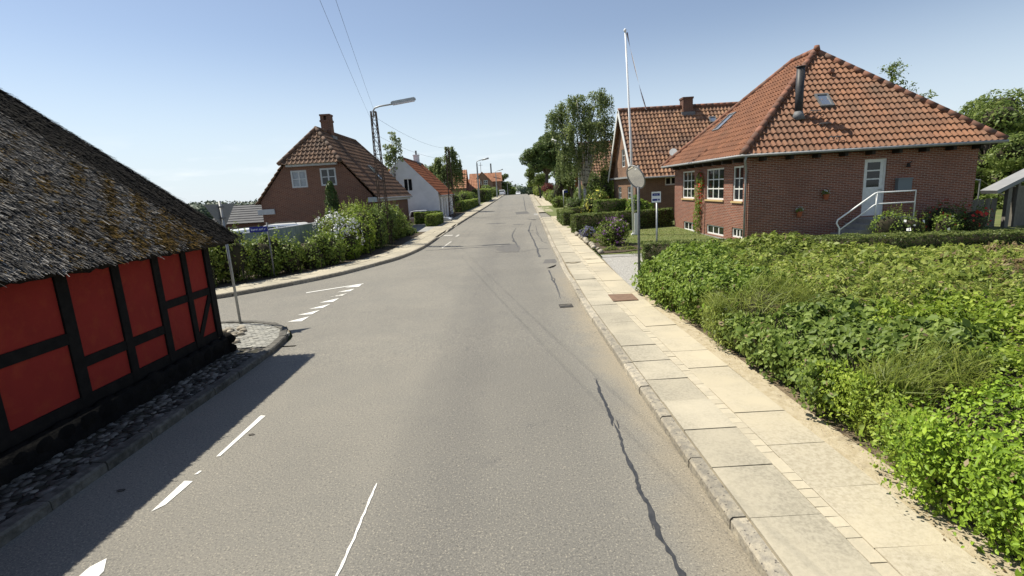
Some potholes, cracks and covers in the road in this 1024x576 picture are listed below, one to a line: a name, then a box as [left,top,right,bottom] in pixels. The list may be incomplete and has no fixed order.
manhole cover [608,293,638,302]
crack [548,262,577,298]
